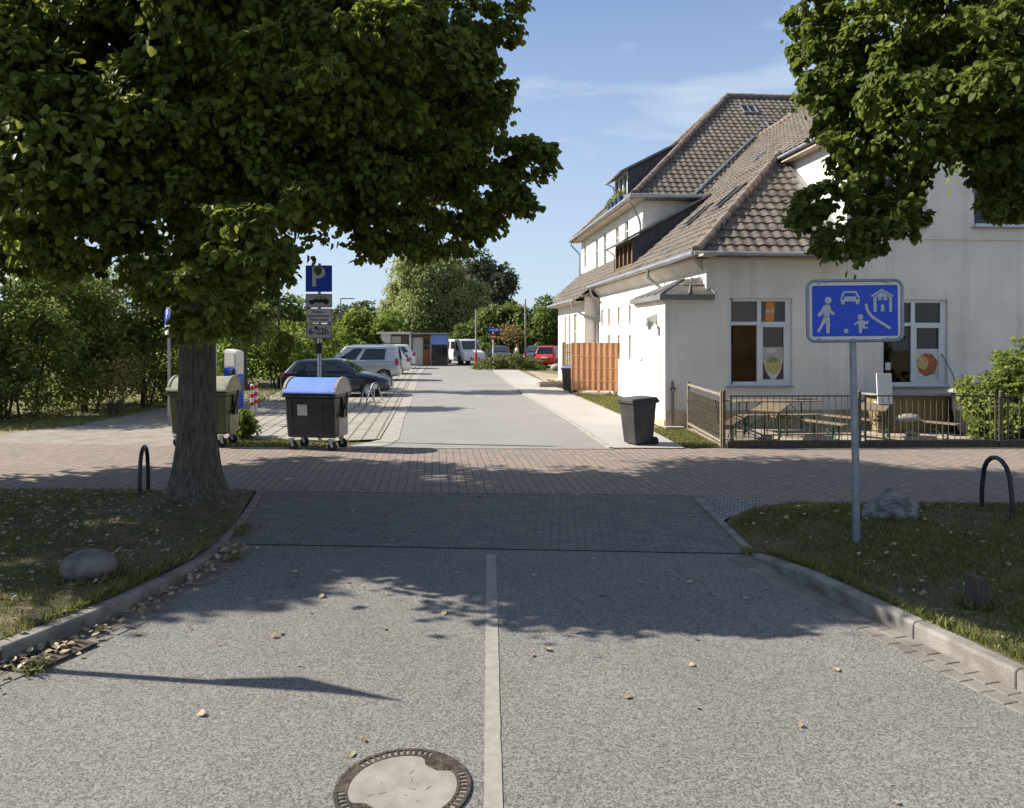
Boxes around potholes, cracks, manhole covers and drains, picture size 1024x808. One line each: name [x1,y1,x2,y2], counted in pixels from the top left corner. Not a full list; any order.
manhole cover [333,748,471,808]
